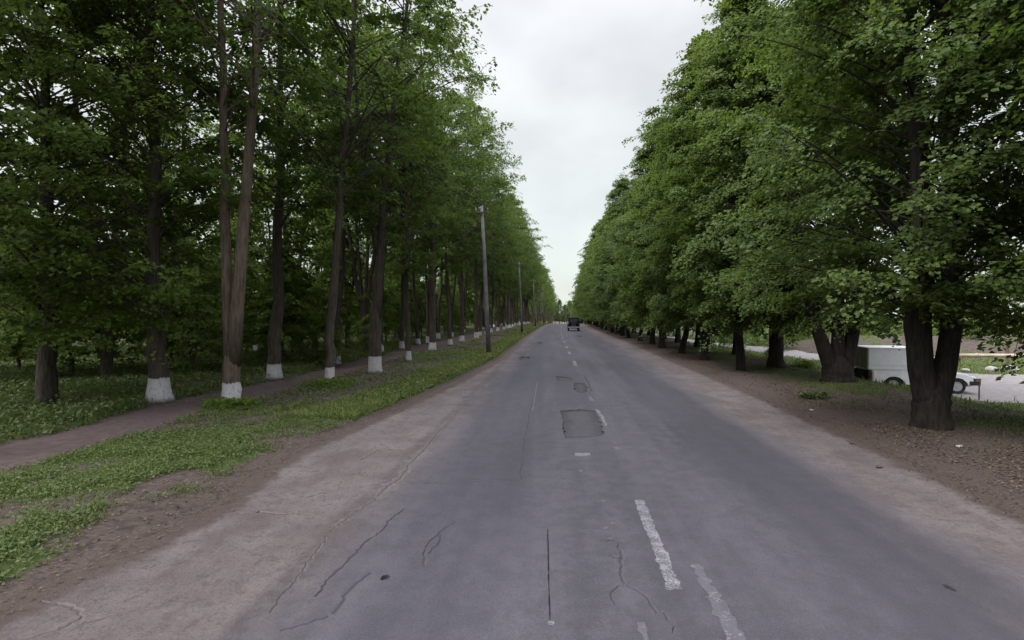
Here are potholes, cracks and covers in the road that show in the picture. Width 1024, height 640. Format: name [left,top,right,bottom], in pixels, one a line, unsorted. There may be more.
pothole [560,409,604,438]
crack [256,410,513,631]
pothole [574,383,588,393]
crack [600,537,675,633]
